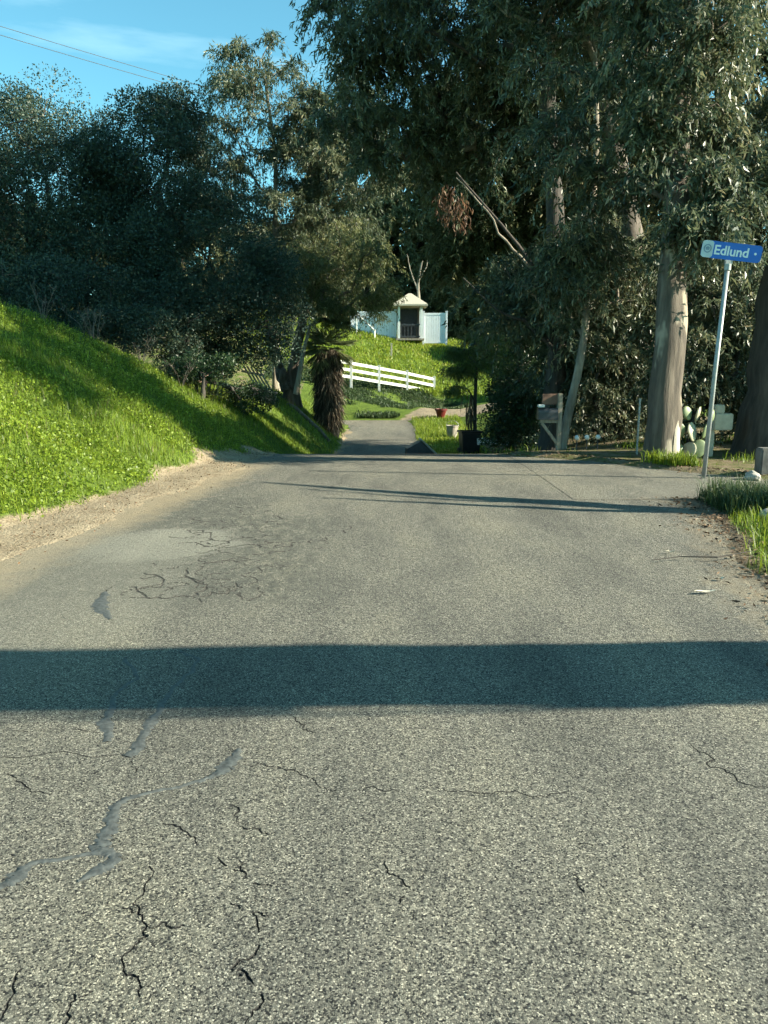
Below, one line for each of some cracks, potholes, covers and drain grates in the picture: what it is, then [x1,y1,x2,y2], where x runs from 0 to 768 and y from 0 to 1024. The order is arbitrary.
crack [383,861,411,904]
crack [99,505,352,602]
crack [232,804,275,835]
crack [64,991,93,1024]
crack [245,763,576,798]
crack [688,742,768,788]
crack [0,968,23,1021]
crack [229,903,269,1024]
crack [2,751,138,795]
crack [162,823,272,886]
crack [120,866,185,997]
